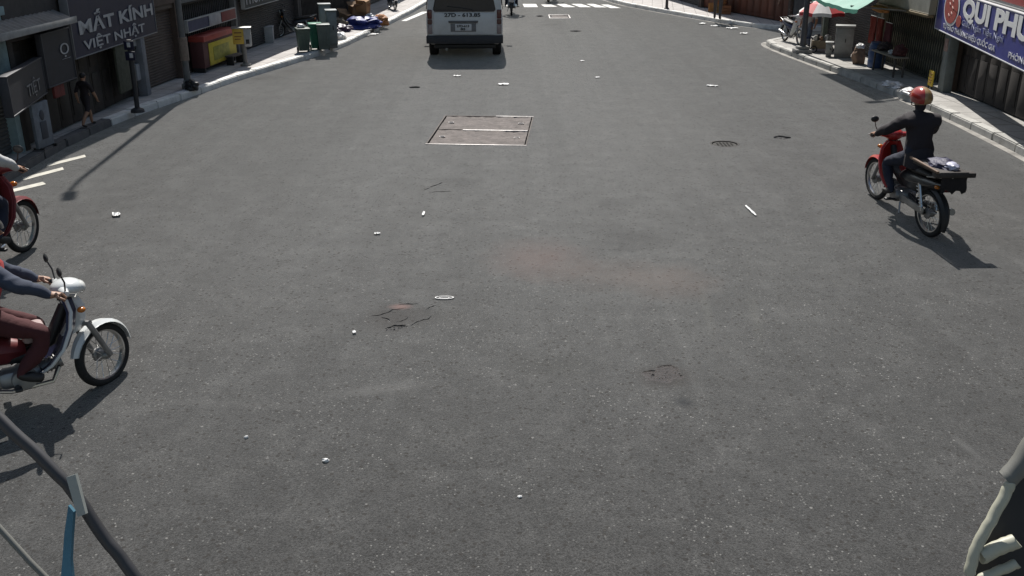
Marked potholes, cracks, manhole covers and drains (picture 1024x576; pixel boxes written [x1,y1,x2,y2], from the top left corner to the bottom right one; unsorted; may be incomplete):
crack [373,303,436,326]
manhole cover [425,115,534,146]
